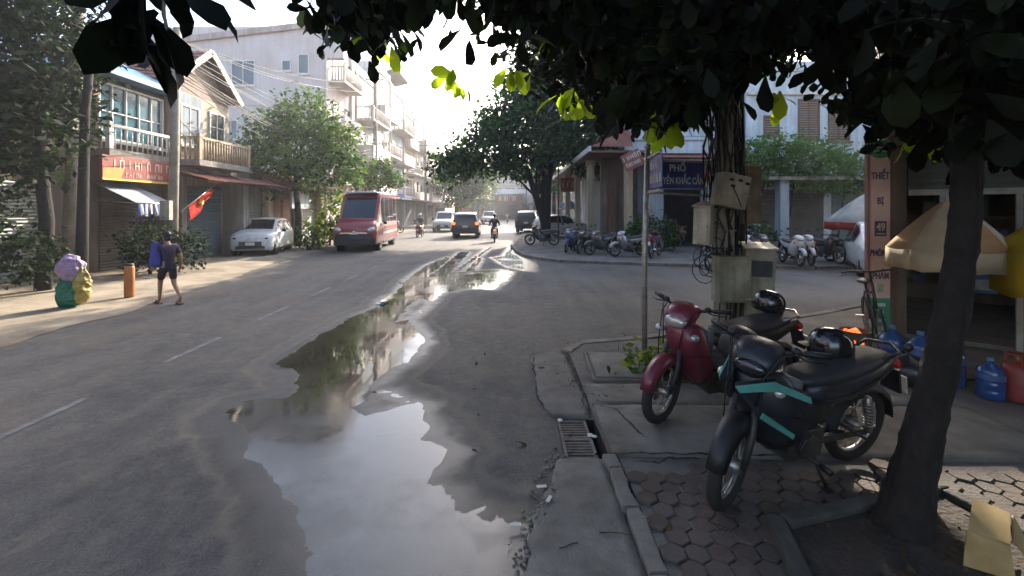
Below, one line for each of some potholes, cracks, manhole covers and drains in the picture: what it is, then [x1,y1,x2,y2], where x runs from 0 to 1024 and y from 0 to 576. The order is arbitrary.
drain grate [556,420,606,459]
crack [532,353,544,405]
